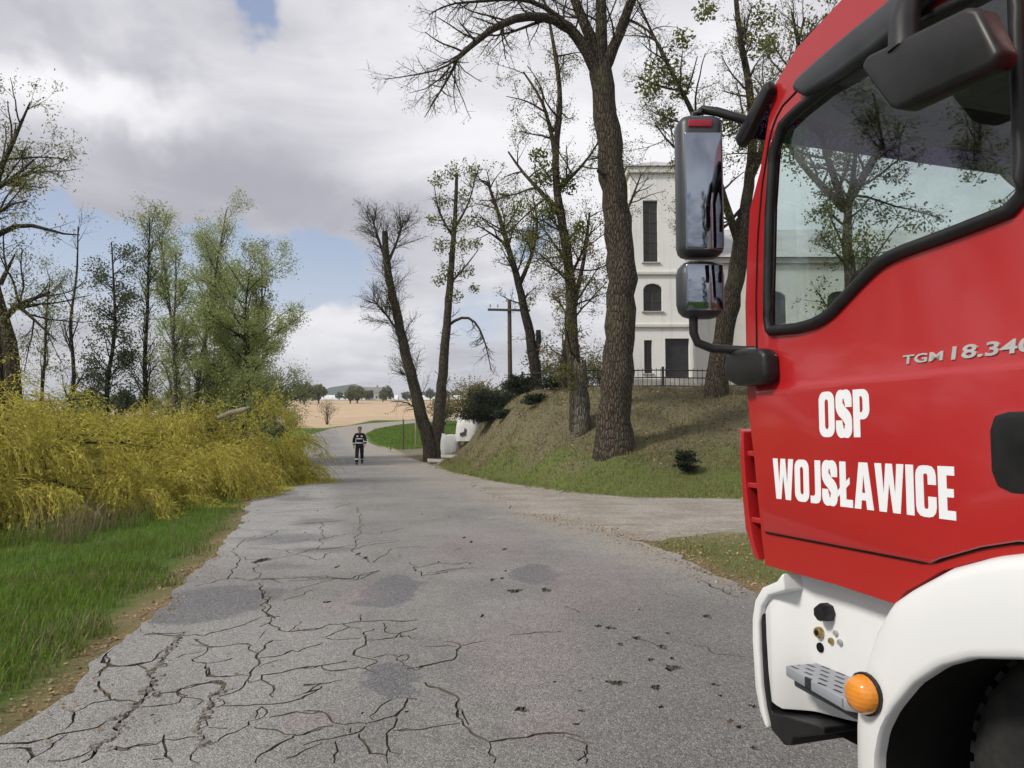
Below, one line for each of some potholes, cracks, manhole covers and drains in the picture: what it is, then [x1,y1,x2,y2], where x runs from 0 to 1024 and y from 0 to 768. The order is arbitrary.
crack [5,503,593,764]
